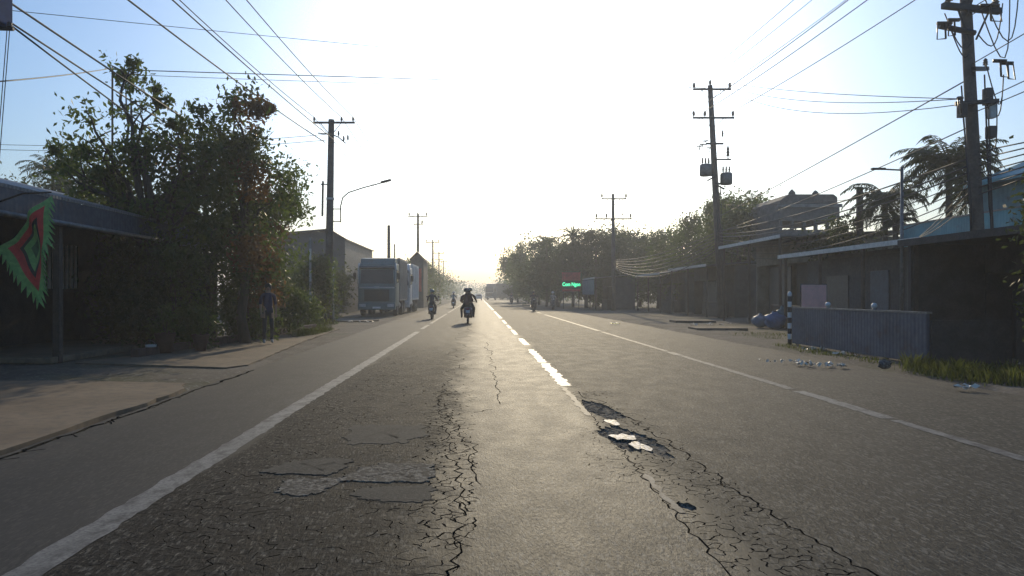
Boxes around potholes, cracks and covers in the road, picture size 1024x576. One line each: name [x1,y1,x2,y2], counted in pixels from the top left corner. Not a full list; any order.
crack [480,342,501,412]
pothole [676,502,697,511]
pothole [596,425,676,459]
crack [566,391,879,576]
crack [89,322,481,576]
pothole [582,400,626,420]
